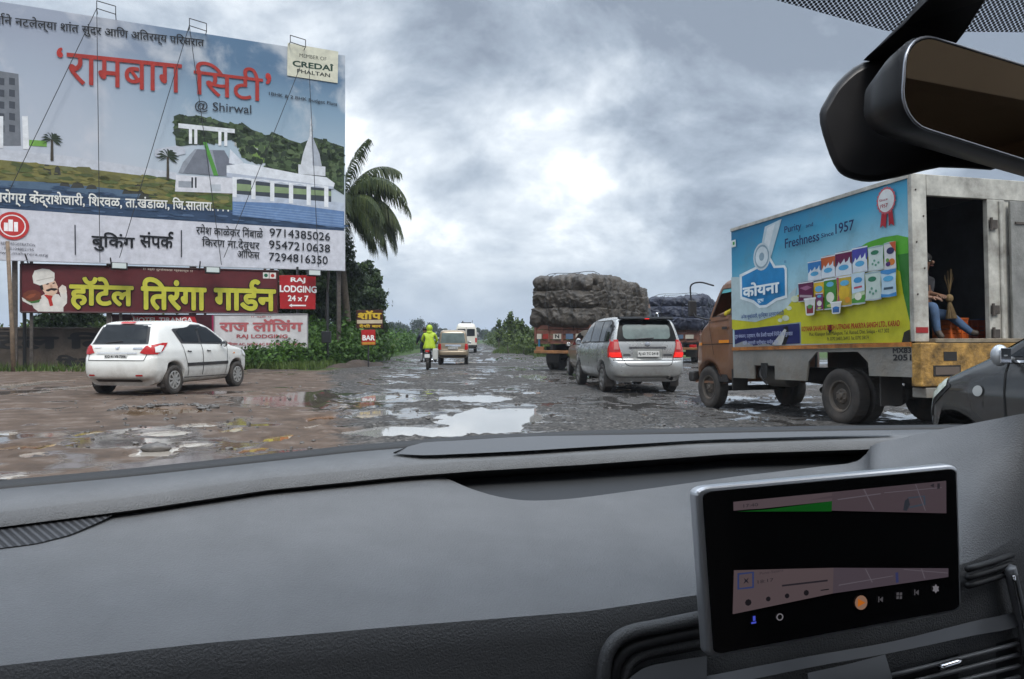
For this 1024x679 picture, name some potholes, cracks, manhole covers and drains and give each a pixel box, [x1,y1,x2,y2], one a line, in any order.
pothole [91,406,215,418]
pothole [301,422,475,441]
pothole [408,392,542,404]
pothole [169,420,218,429]
pothole [393,403,580,436]
pothole [123,427,208,438]
pothole [116,444,188,459]
